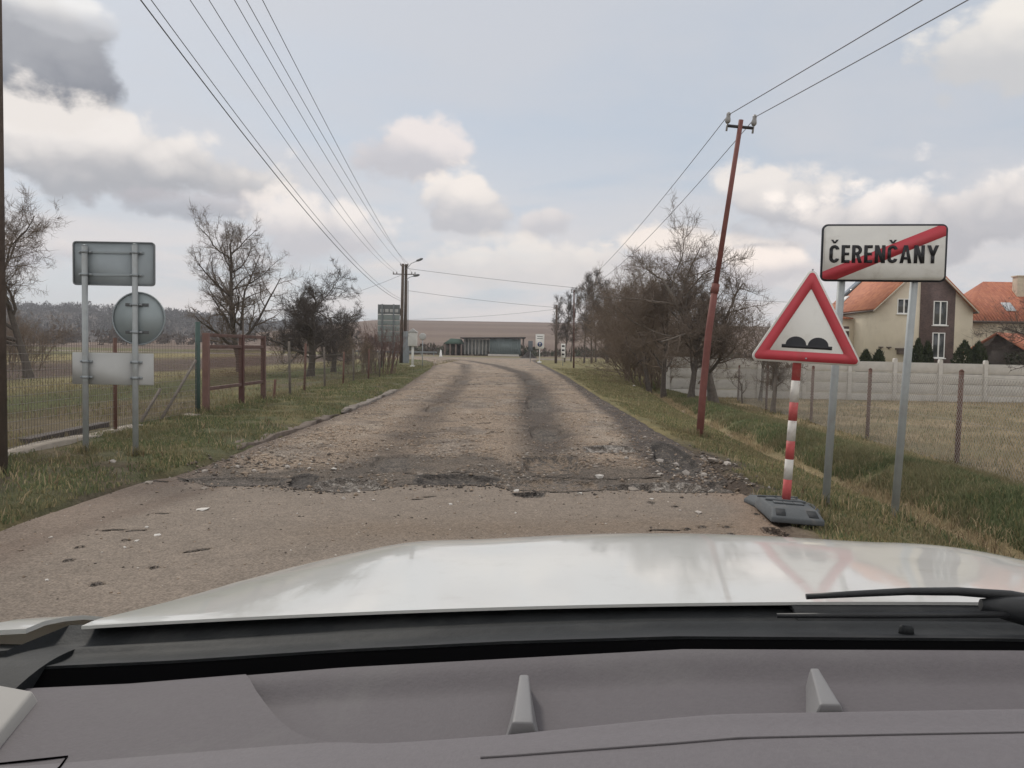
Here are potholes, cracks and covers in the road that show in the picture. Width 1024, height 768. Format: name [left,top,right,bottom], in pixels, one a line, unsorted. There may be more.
pothole [412,473,501,486]
pothole [312,477,387,492]
pothole [580,445,637,454]
pothole [277,473,320,489]
pothole [649,441,702,477]
